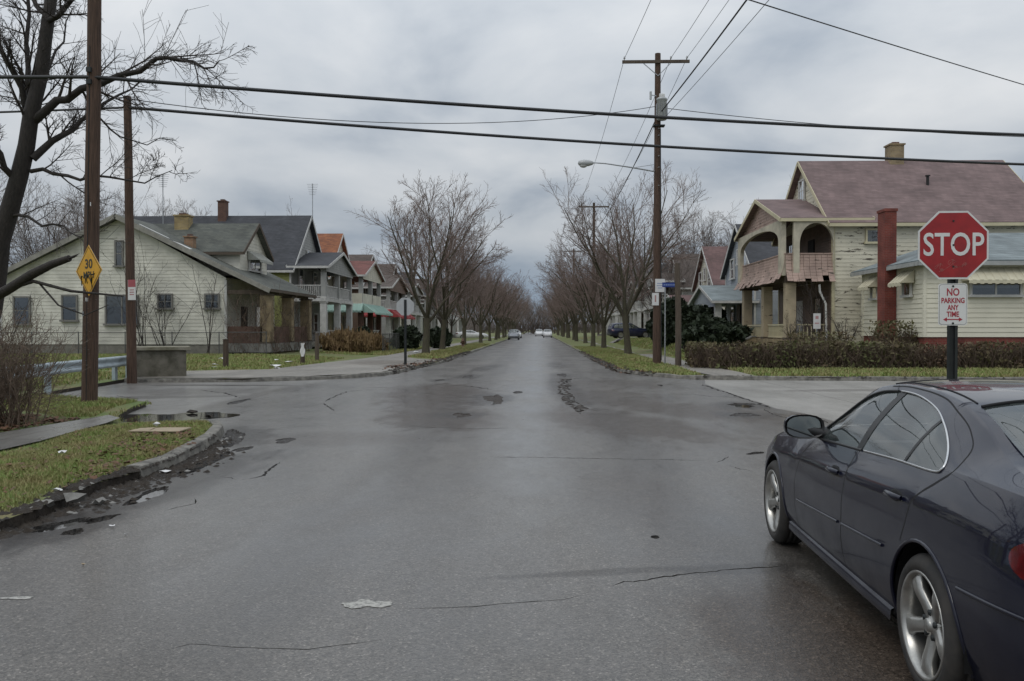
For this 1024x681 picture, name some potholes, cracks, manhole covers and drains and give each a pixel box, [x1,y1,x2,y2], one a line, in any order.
pothole [483,395,503,404]
pothole [82,514,121,524]
crack [447,596,576,608]
crack [557,378,589,414]
crack [612,565,788,586]
pothole [27,517,94,533]
crack [159,639,381,652]
pothole [122,486,169,506]
pothole [176,451,232,477]
pothole [222,429,245,448]
